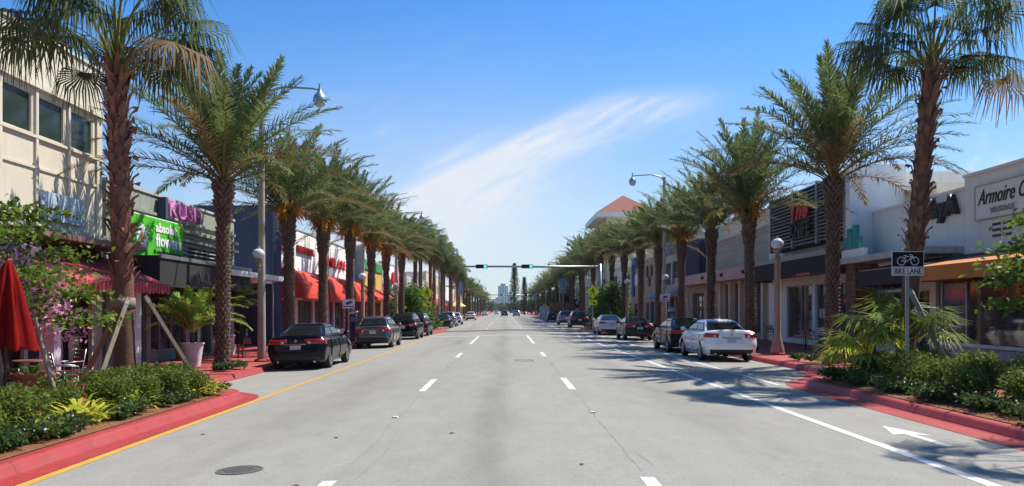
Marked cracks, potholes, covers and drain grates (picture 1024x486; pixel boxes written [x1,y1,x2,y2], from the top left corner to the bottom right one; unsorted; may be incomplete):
crack [575,392,648,471]
crack [342,394,420,482]
manhole cover [215,465,263,475]
